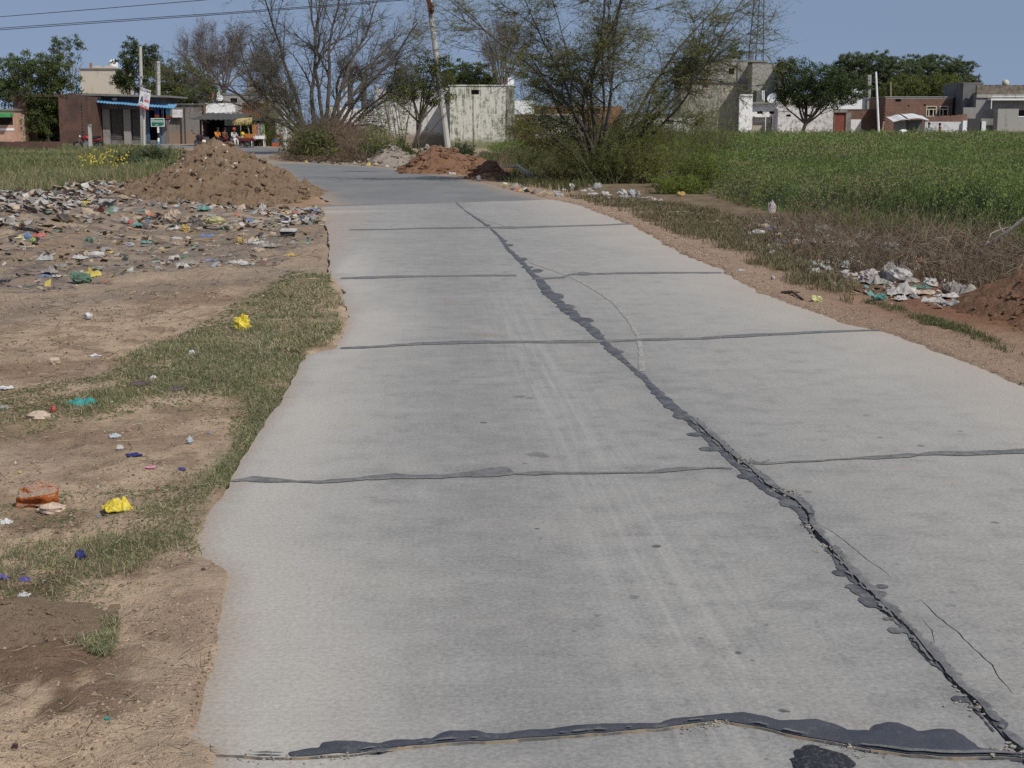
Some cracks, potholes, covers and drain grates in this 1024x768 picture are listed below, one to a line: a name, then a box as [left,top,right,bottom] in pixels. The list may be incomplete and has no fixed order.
crack [921,600,1012,693]
